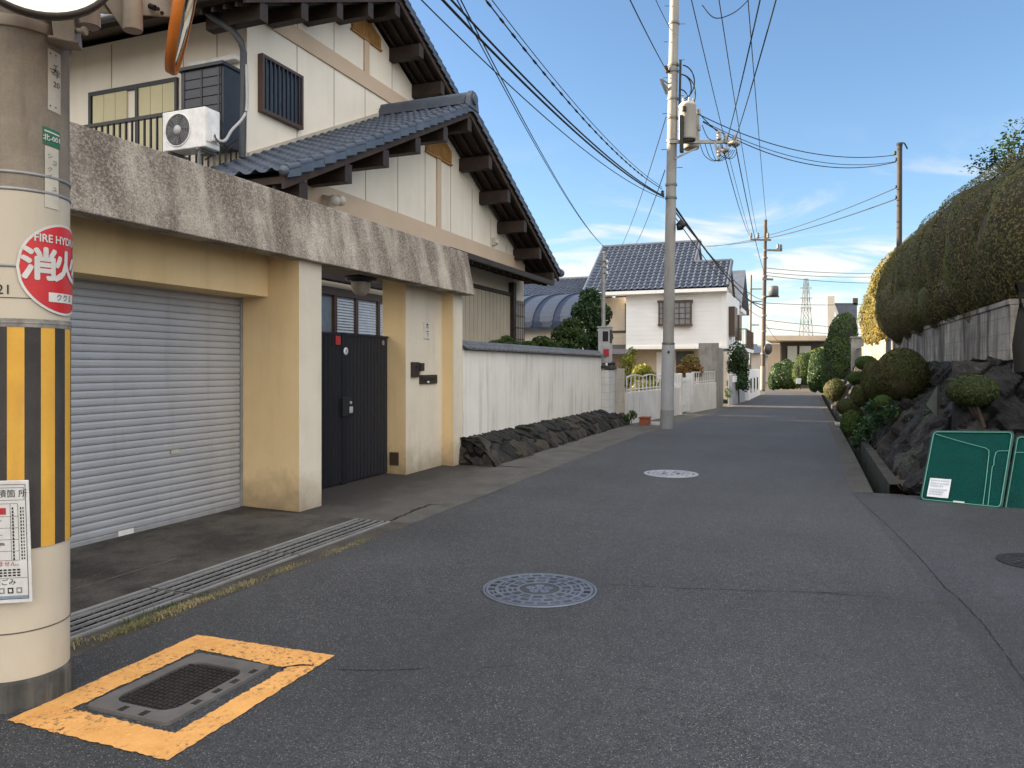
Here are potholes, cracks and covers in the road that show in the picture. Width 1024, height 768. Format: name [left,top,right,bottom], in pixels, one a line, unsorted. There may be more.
drain grate [70,588,192,641]
manhole cover [482,573,597,608]
crack [602,583,932,603]
manhole cover [644,470,699,478]
drain grate [150,550,299,595]
drain grate [261,518,391,556]
manhole cover [996,553,1024,568]
